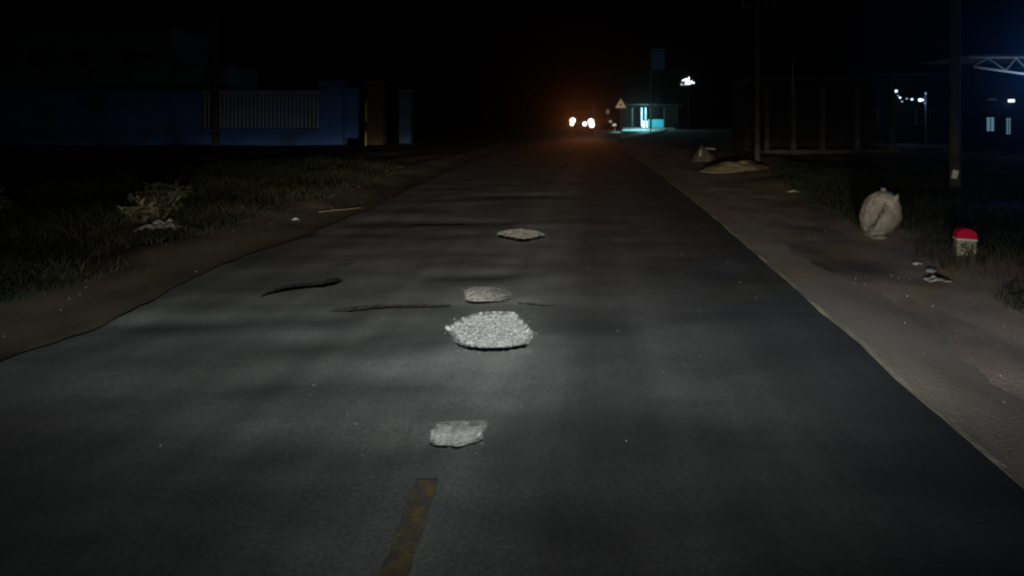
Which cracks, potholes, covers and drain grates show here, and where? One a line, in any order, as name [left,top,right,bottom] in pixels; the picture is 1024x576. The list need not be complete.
crack [260,263,555,312]
